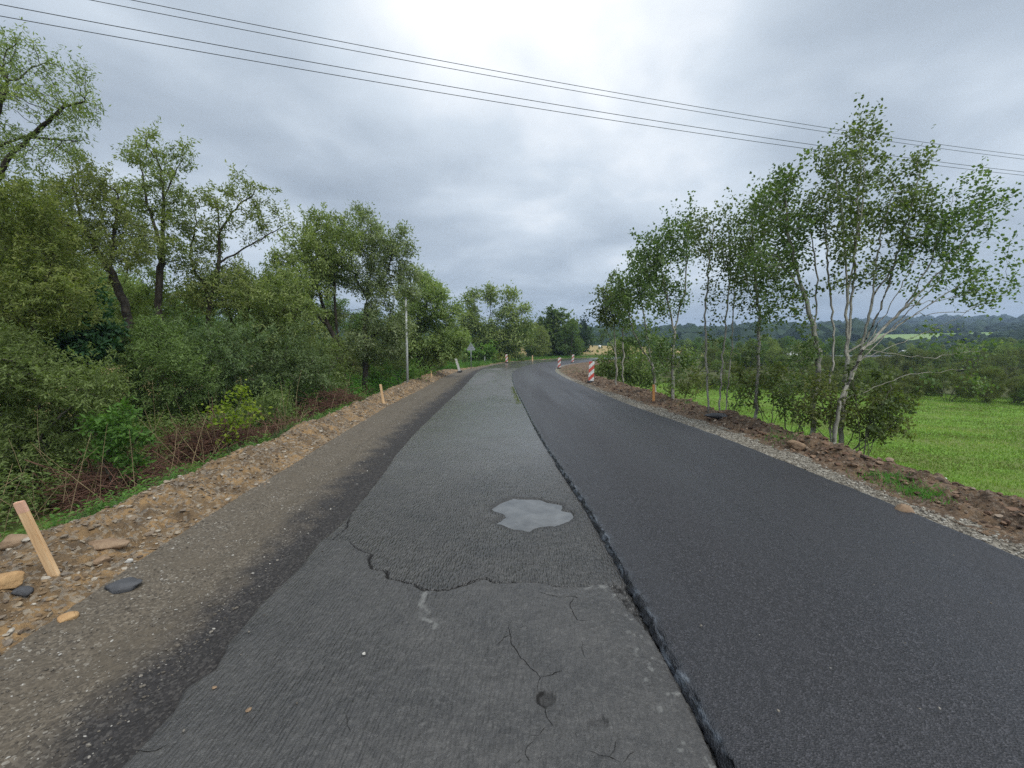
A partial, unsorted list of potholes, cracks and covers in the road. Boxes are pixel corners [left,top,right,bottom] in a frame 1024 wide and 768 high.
crack [496,627,562,764]
pothole [534,689,558,709]
crack [325,513,610,621]
